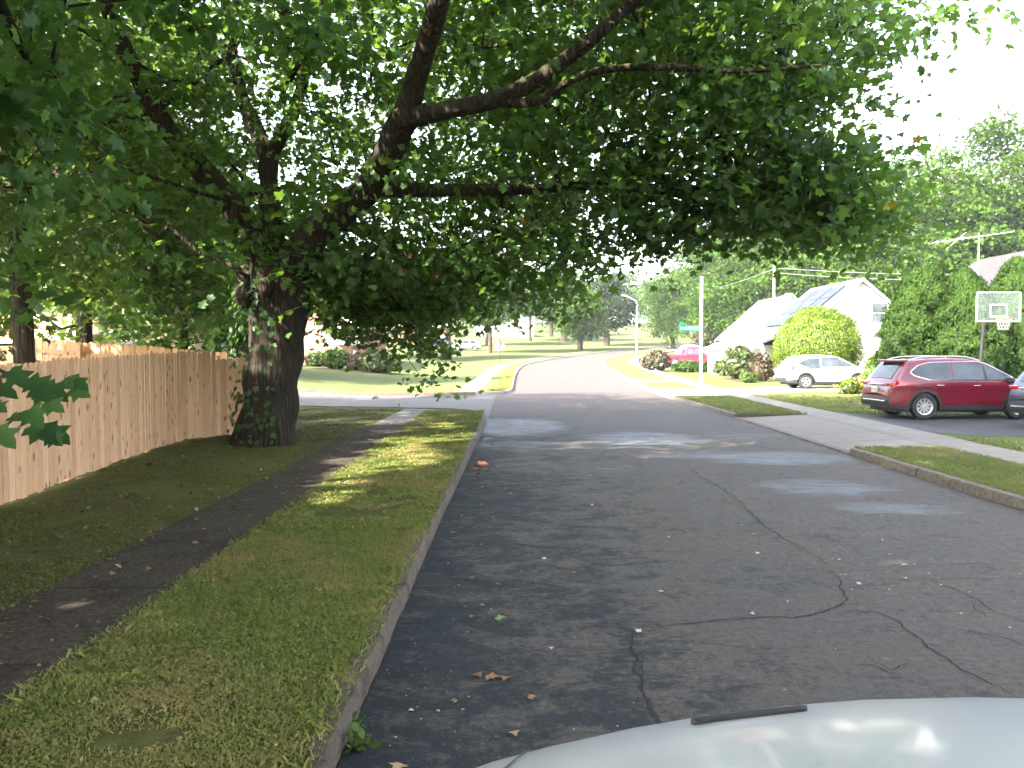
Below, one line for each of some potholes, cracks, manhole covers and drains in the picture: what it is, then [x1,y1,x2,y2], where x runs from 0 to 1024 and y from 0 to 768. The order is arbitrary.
crack [579,471,1019,724]
